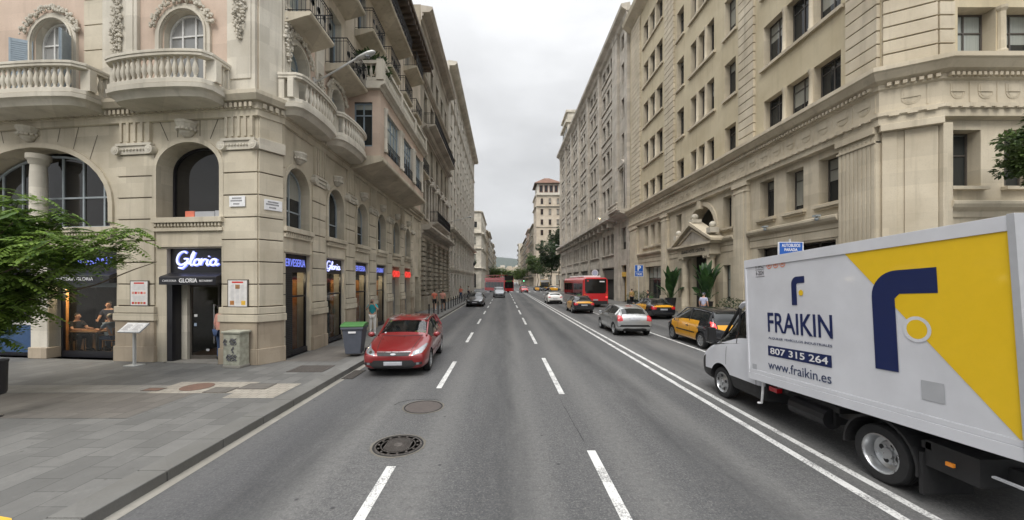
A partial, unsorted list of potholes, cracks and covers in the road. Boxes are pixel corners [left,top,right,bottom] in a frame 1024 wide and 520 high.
drain grate [341,370,366,379]
manhole cover [179,383,215,391]
manhole cover [369,434,426,458]
manhole cover [402,400,445,414]
